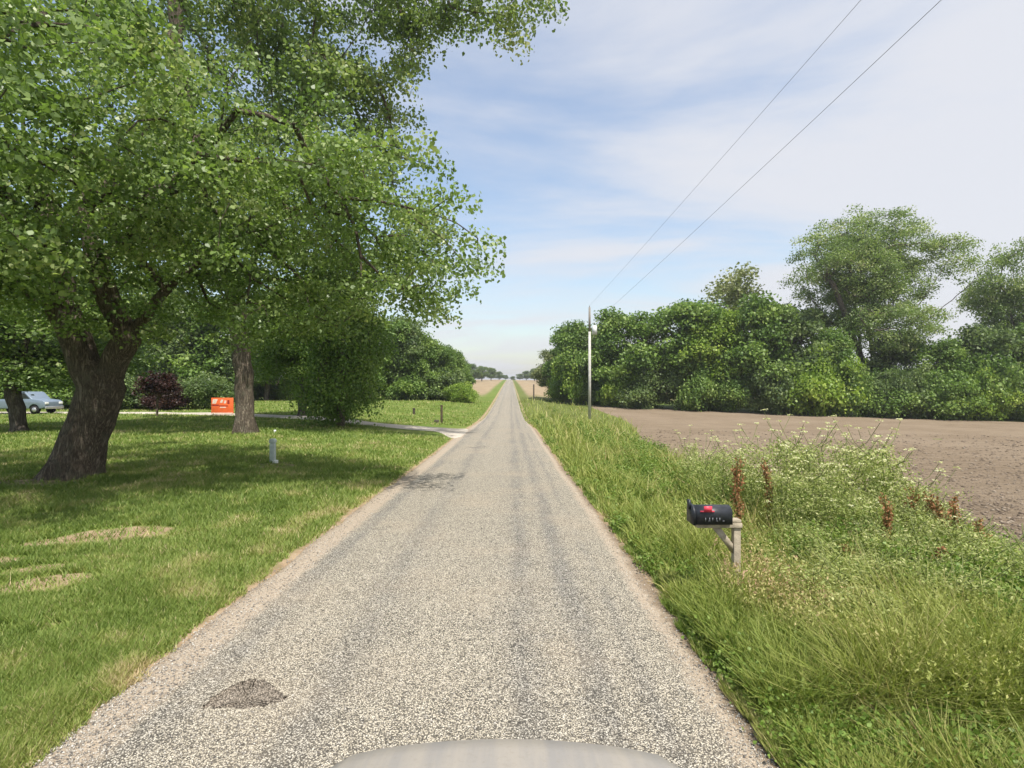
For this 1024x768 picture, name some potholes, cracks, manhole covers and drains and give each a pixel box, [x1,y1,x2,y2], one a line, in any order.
pothole [202,679,287,710]
